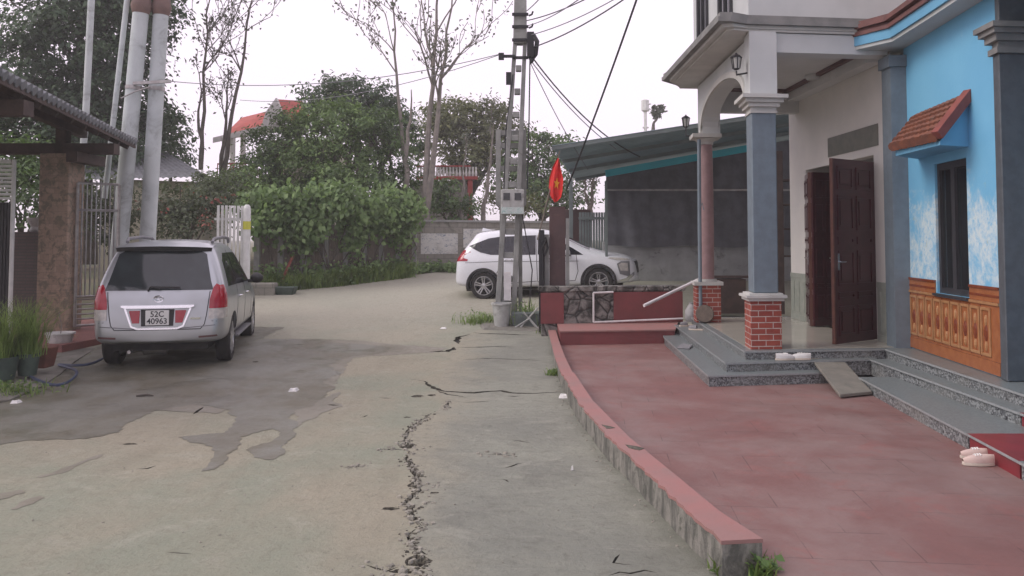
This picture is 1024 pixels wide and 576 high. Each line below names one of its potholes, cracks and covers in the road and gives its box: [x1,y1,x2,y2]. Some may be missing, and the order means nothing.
crack [431,334,538,361]
crack [412,379,554,408]
crack [611,554,657,575]
